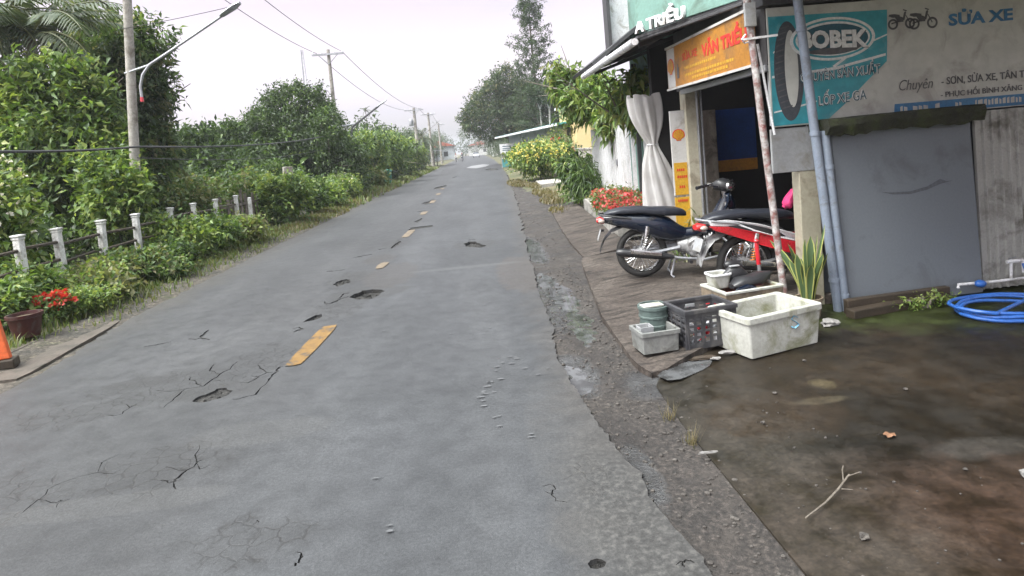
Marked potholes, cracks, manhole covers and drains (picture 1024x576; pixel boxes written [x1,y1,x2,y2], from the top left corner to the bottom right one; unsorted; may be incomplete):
pothole [354,289,384,299]
pothole [195,388,233,402]
